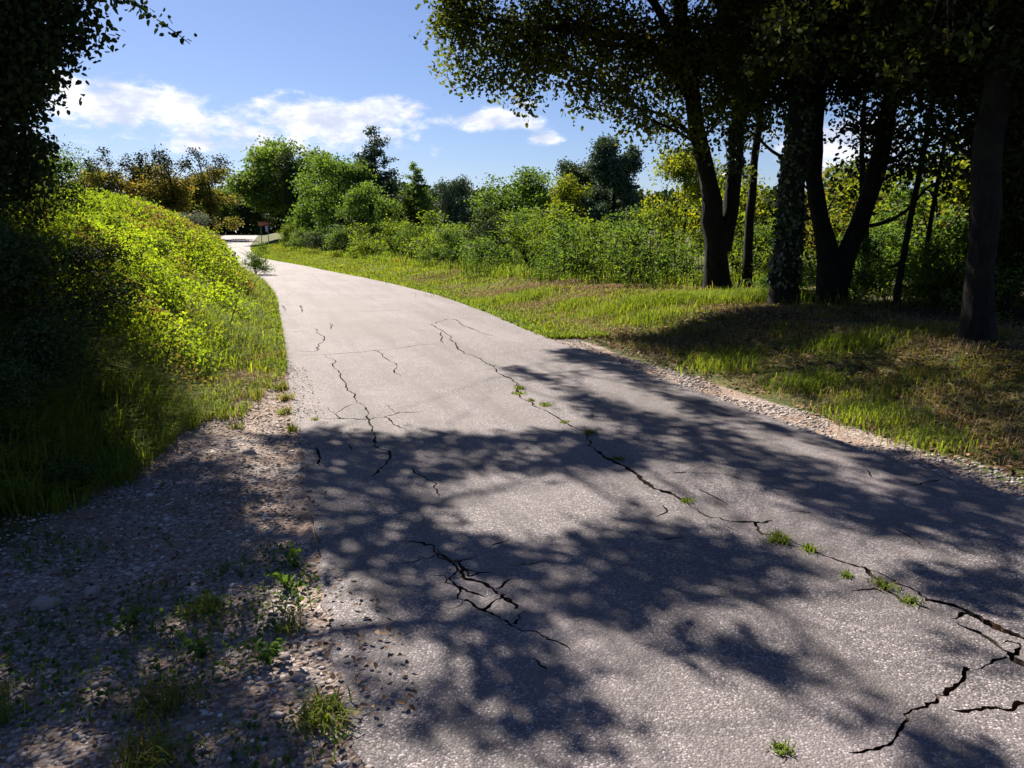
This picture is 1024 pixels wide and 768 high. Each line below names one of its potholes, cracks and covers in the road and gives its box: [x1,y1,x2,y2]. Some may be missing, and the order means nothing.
crack [311,324,440,496]
crack [400,539,571,671]
crack [668,472,743,505]
crack [848,622,1024,754]
